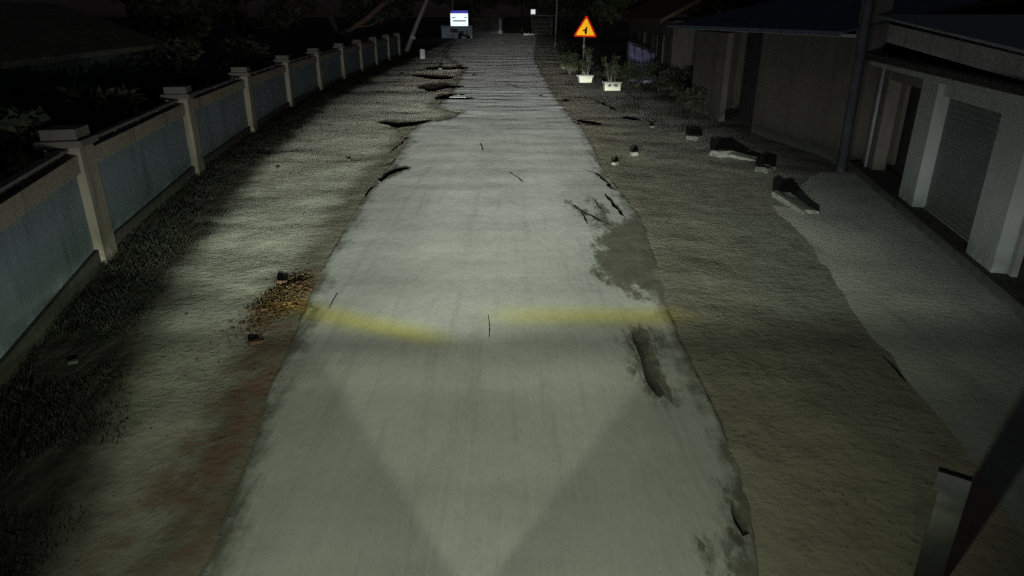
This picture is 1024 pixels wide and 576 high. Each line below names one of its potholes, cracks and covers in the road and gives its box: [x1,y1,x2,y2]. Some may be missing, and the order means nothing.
pothole [377,119,430,128]
crack [569,169,625,226]
pothole [378,165,410,182]
pothole [730,500,750,536]
pothole [417,82,464,92]
pothole [434,92,475,100]
pothole [631,329,664,398]
